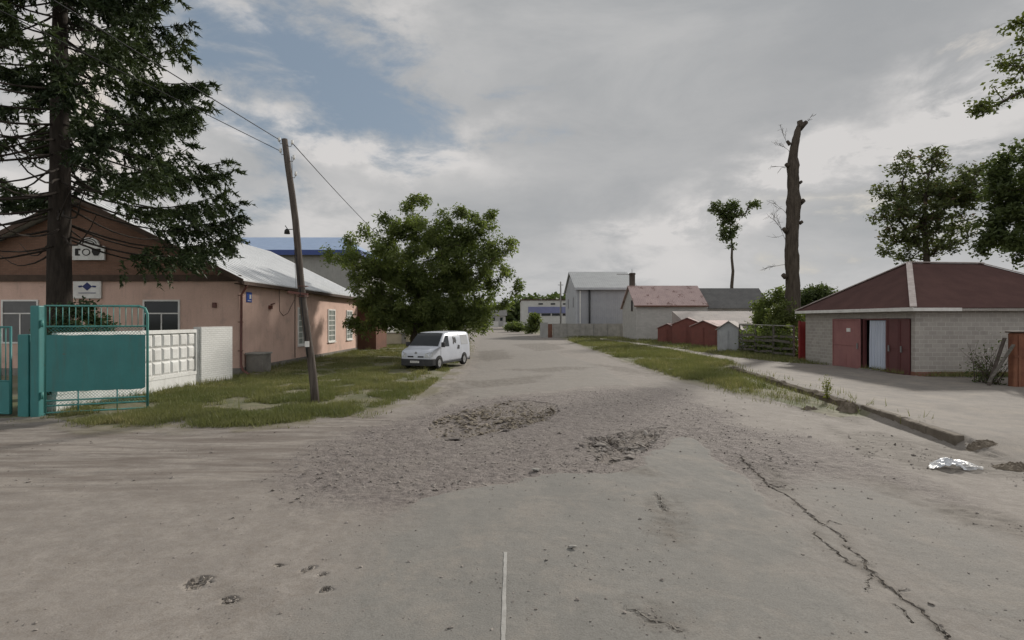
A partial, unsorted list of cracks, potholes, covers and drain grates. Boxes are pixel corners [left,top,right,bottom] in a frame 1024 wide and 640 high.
pothole [424,400,563,441]
crack [739,457,954,640]
pothole [580,427,667,466]
pothole [183,576,213,591]
crack [623,604,683,634]
crack [654,491,668,512]
